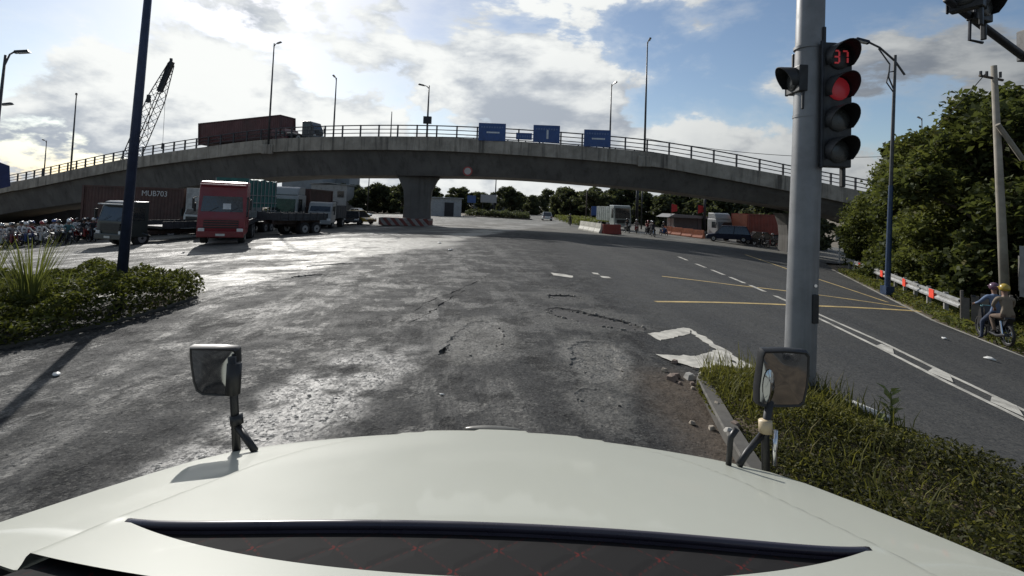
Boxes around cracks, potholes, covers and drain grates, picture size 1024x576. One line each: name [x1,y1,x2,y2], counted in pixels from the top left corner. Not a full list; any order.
crack [409,275,486,323]
